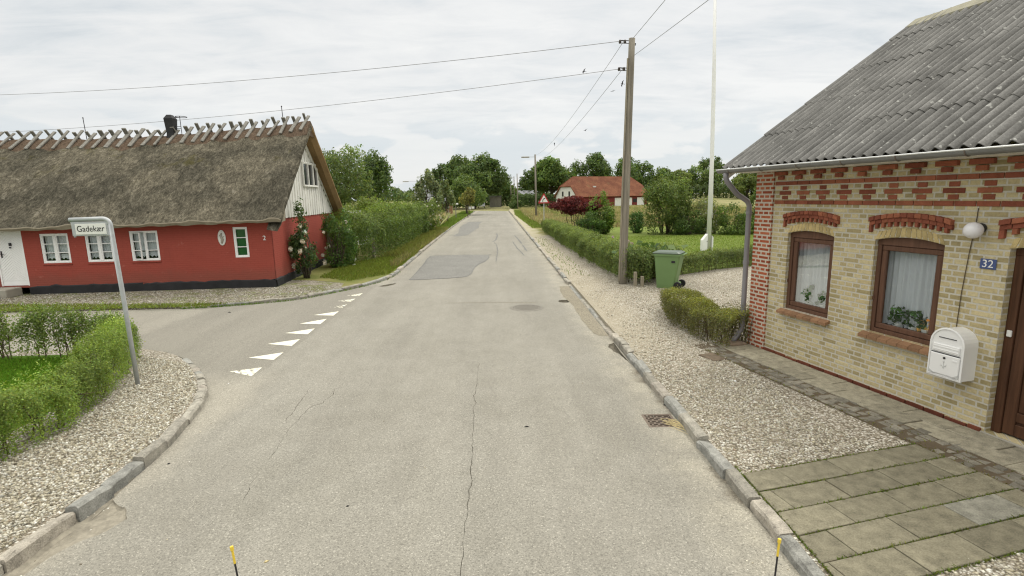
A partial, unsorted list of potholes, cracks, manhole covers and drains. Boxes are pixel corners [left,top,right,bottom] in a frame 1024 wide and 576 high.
drain grate [641,414,679,428]
crack [460,366,479,576]
crack [210,386,341,525]
